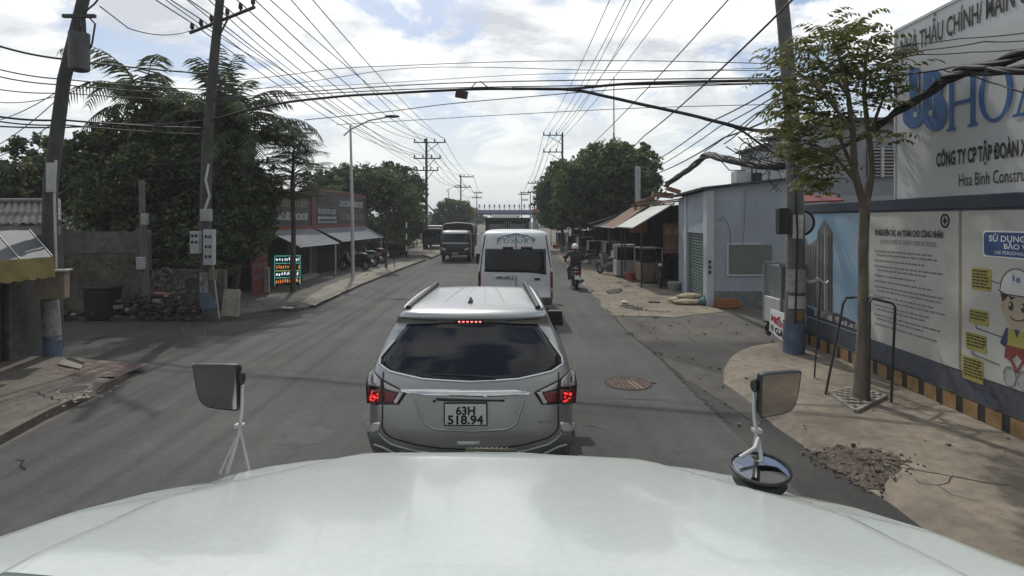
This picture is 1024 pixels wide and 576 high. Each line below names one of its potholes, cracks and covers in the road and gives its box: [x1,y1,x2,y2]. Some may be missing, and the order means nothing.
crack [902,464,1004,501]
crack [606,307,731,424]
manhole cover [56,384,92,394]
manhole cover [604,376,652,390]
